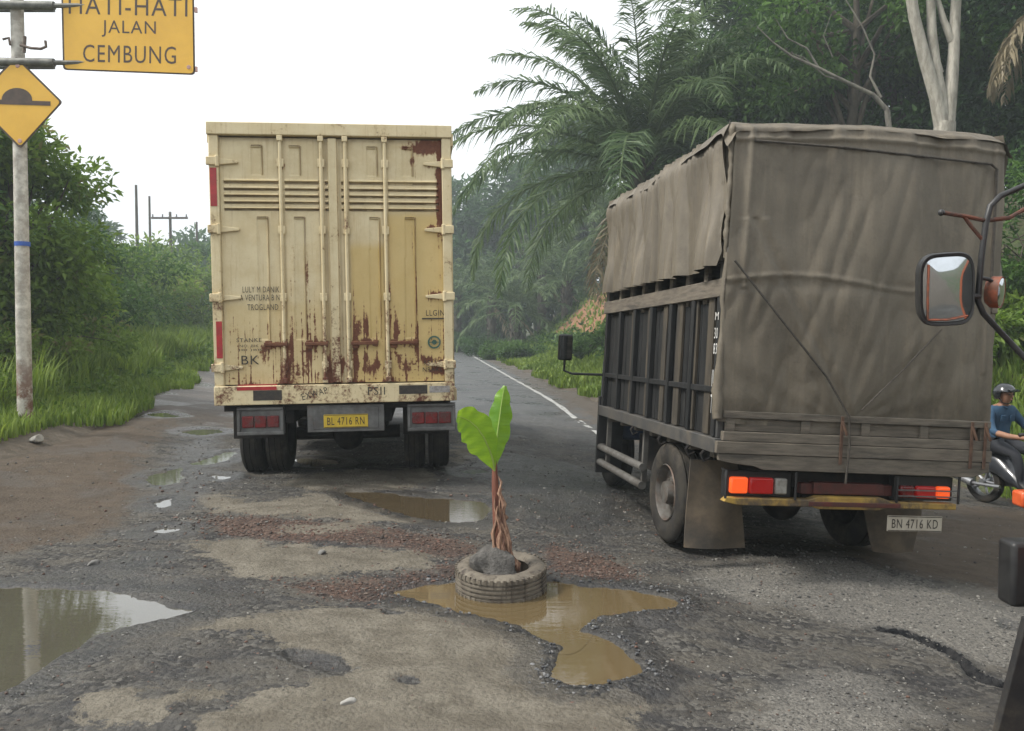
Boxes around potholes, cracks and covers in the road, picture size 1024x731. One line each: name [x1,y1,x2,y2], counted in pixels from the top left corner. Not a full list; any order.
pothole [385,577,683,654]
pothole [393,674,422,685]
pothole [0,583,200,694]
crack [866,624,1006,690]
pothole [137,467,190,486]
pothole [339,489,493,523]
pothole [176,428,227,436]
pothole [186,450,240,466]
pothole [538,628,652,687]
